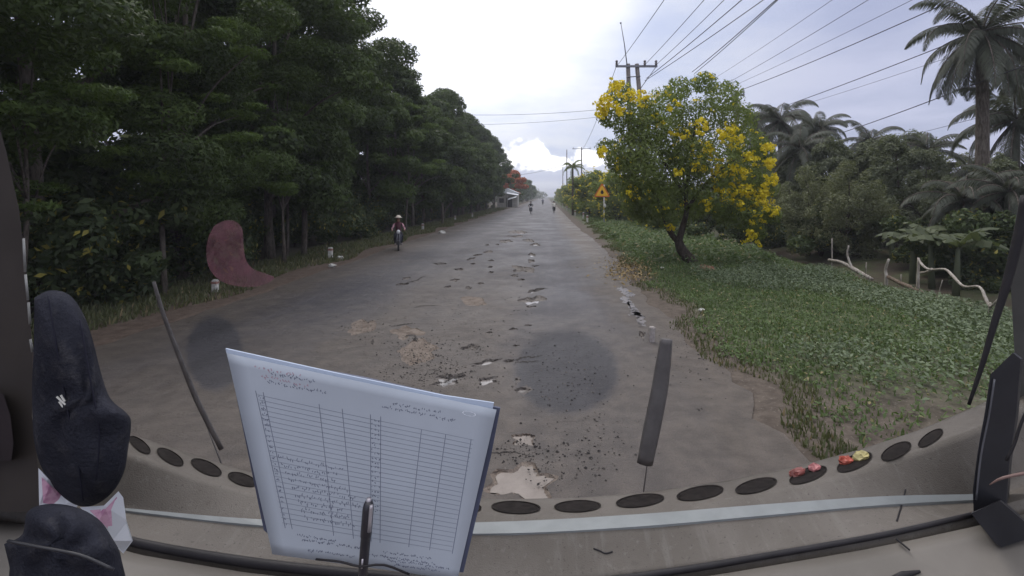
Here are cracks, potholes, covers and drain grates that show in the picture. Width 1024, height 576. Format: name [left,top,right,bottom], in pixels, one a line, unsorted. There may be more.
pothole [483,461,559,499]
pothole [511,433,535,446]
pothole [478,376,500,385]
pothole [517,295,547,305]
pothole [431,374,467,387]
